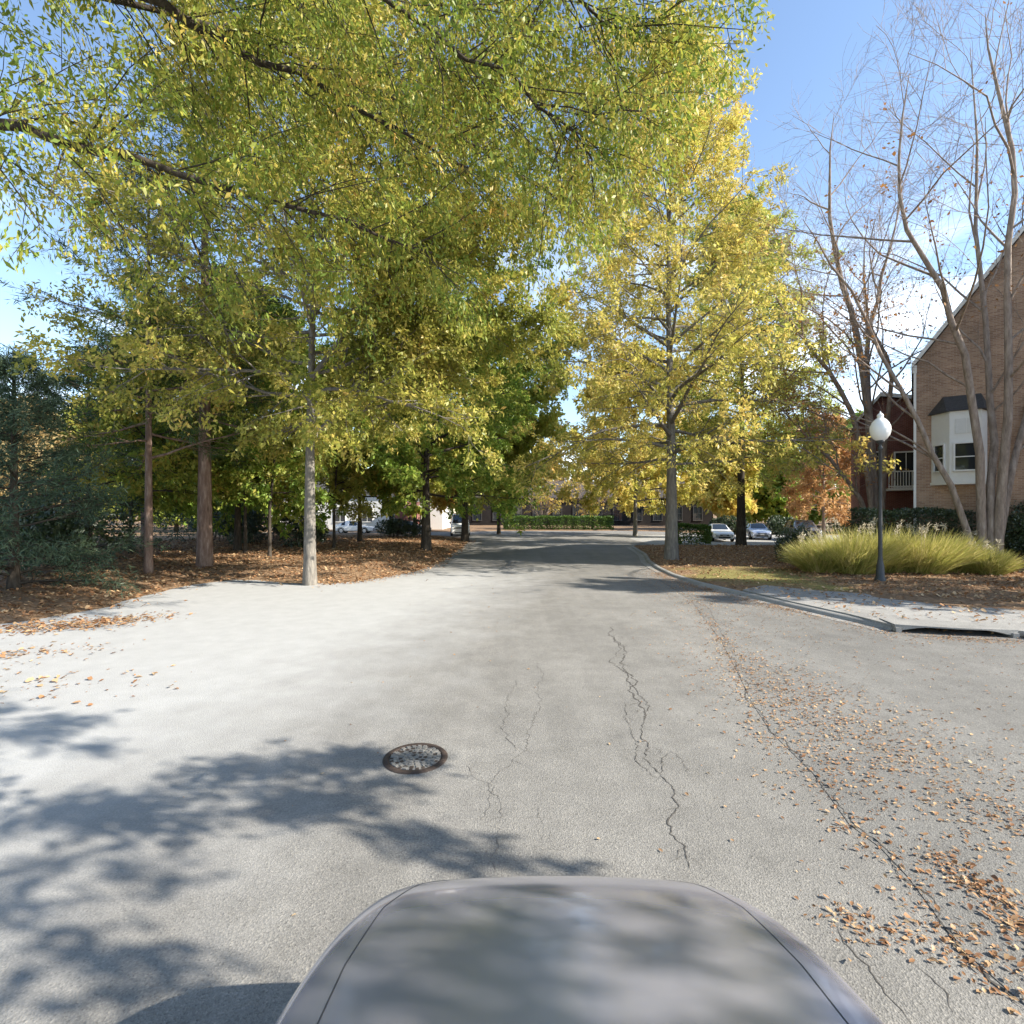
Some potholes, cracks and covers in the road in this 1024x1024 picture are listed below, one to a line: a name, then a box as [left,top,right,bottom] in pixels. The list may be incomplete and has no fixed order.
drain grate [879,618,1020,641]
crack [609,626,701,867]
crack [469,663,544,874]
manhole cover [382,743,448,774]
crack [838,929,952,1023]
